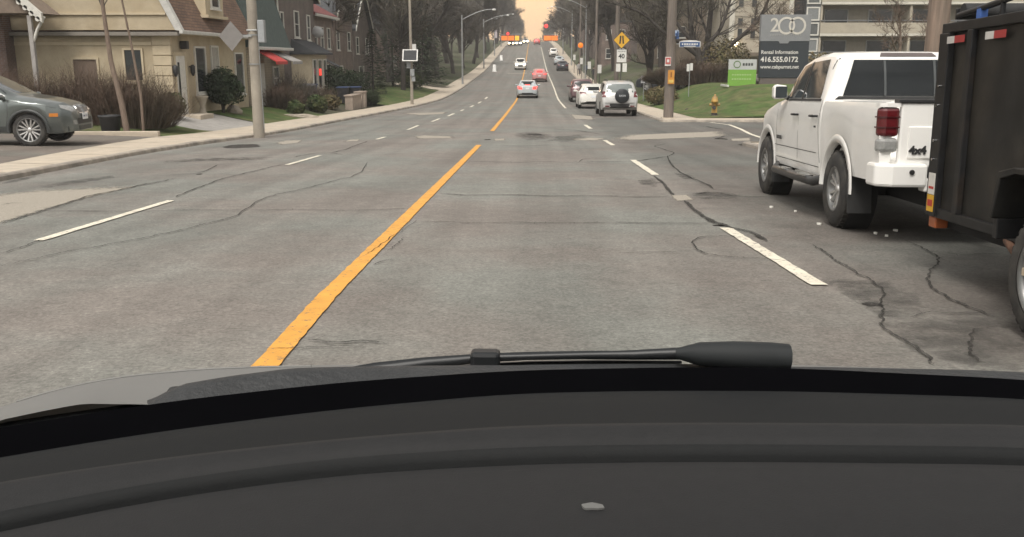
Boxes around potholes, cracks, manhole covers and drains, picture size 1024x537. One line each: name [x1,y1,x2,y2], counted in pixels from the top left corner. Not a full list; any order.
crack [15,141,641,265]
crack [810,241,992,364]
crack [440,144,788,261]
